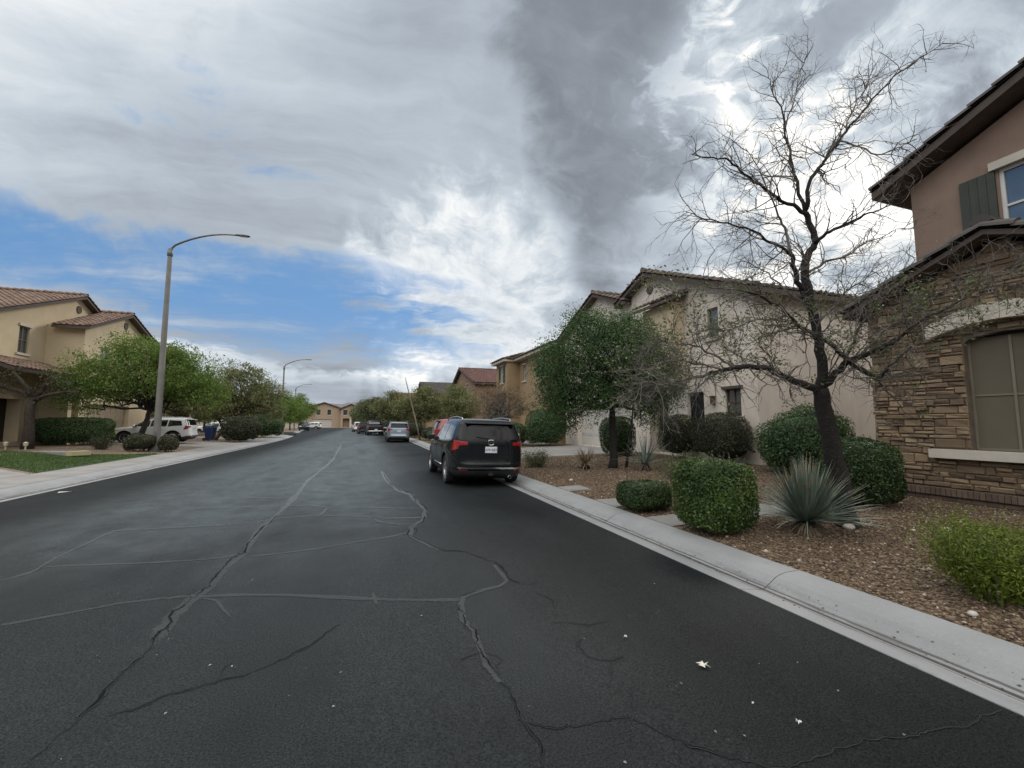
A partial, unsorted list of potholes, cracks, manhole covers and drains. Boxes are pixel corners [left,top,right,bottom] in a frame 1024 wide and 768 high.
crack [1,445,1002,768]
